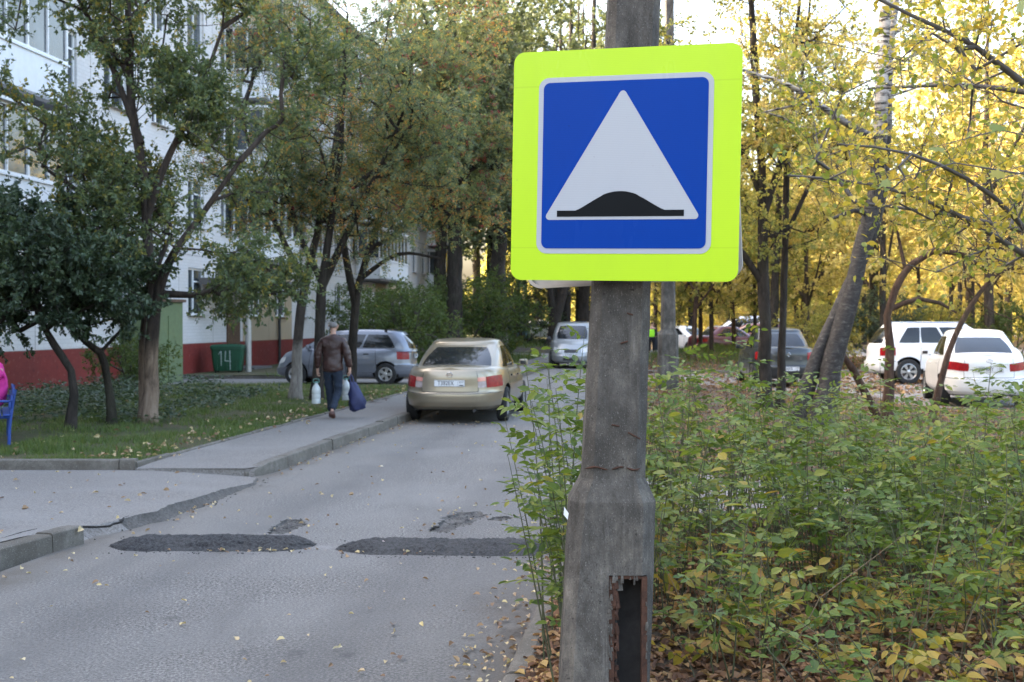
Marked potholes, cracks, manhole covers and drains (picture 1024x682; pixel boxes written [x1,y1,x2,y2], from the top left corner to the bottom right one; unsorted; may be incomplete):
crack [82,516,127,528]
